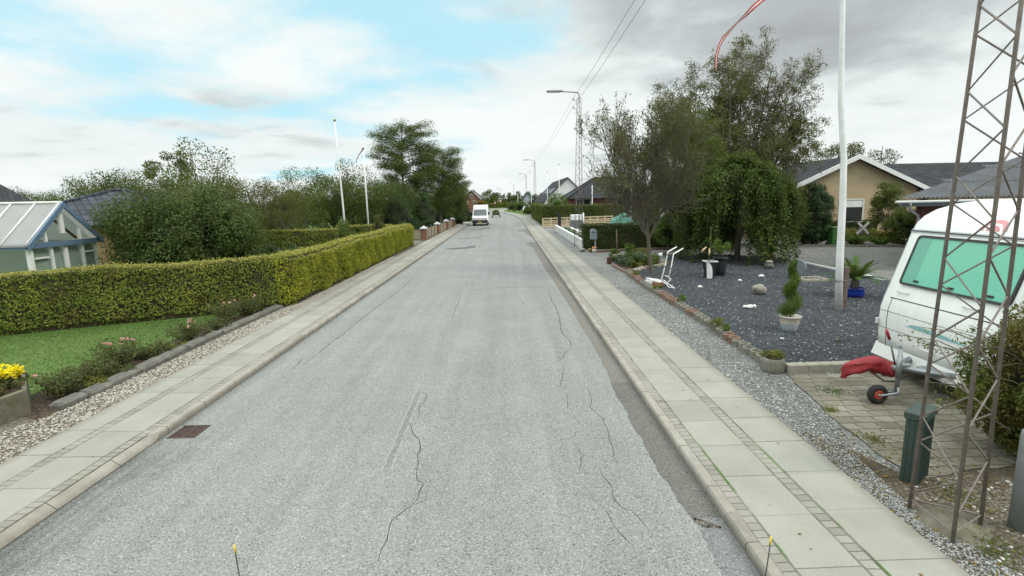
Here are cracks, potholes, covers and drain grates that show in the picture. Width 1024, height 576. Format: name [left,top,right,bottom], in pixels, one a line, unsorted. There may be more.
crack [368,395,427,566]
drain grate [166,425,211,439]
crack [588,390,653,542]
crack [549,295,582,469]
